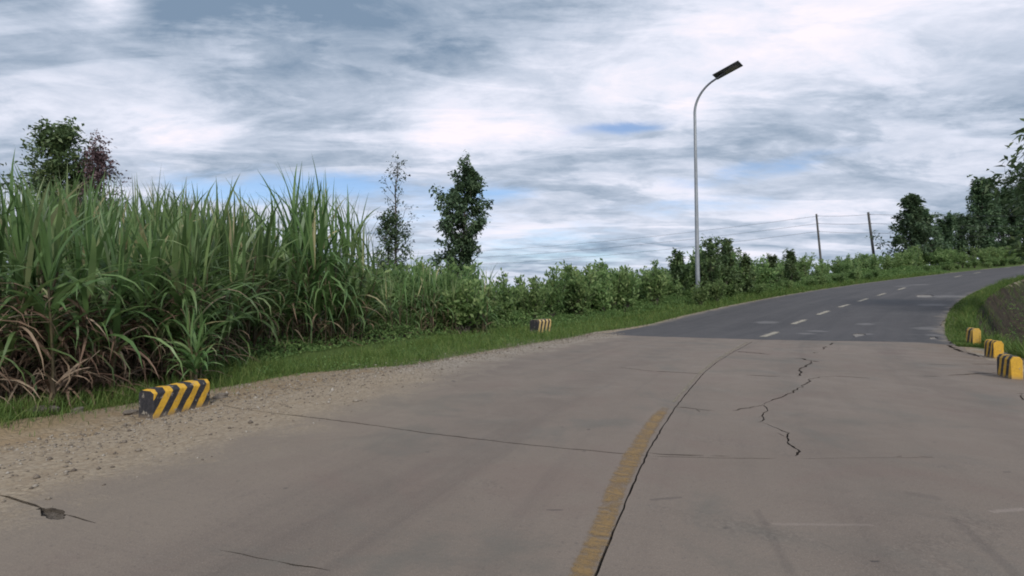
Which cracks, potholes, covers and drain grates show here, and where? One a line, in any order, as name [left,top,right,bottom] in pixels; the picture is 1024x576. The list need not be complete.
crack [739,343,833,456]
pothole [36,508,65,520]
